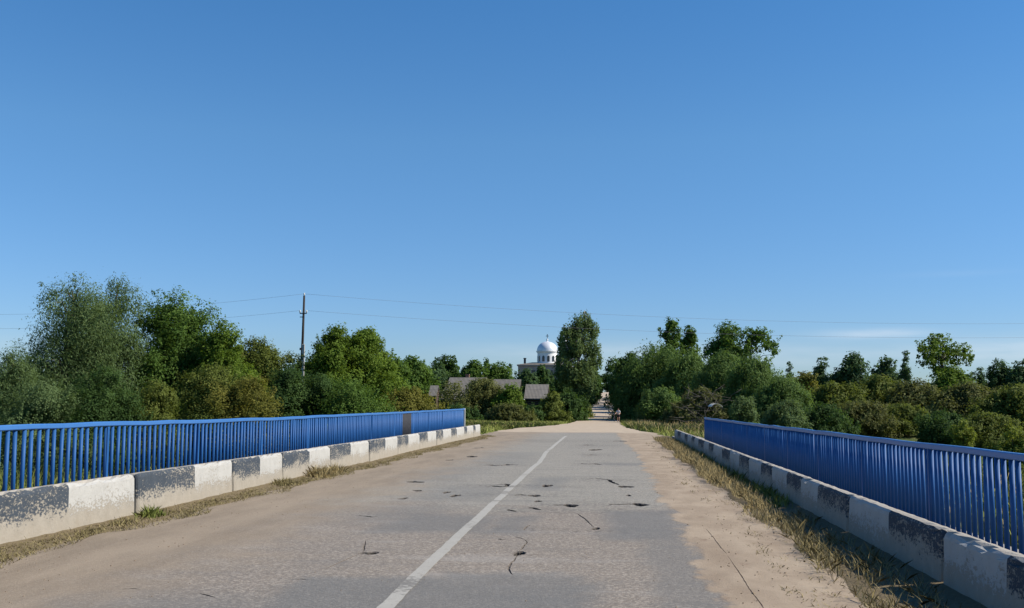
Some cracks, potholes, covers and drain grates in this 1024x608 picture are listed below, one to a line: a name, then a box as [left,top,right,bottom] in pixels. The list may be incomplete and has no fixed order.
crack [493,484,592,575]
crack [706,529,763,607]
